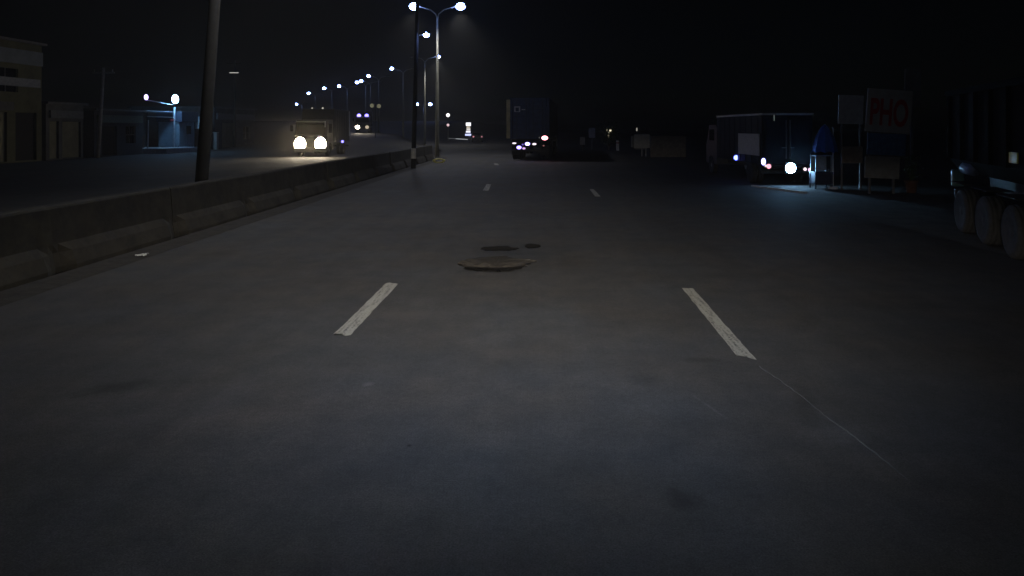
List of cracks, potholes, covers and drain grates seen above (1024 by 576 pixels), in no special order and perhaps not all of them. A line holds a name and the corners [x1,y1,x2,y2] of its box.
crack [760,367,906,478]
